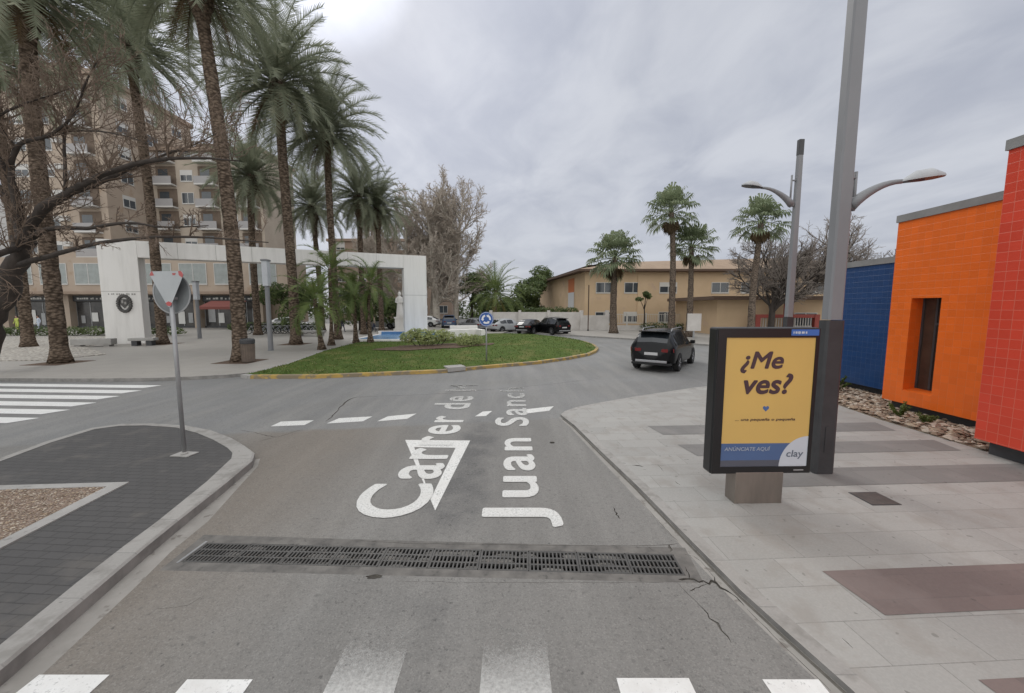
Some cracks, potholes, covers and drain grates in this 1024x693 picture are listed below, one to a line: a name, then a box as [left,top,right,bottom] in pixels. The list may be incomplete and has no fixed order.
manhole cover [848,492,902,506]
crack [351,540,743,640]
